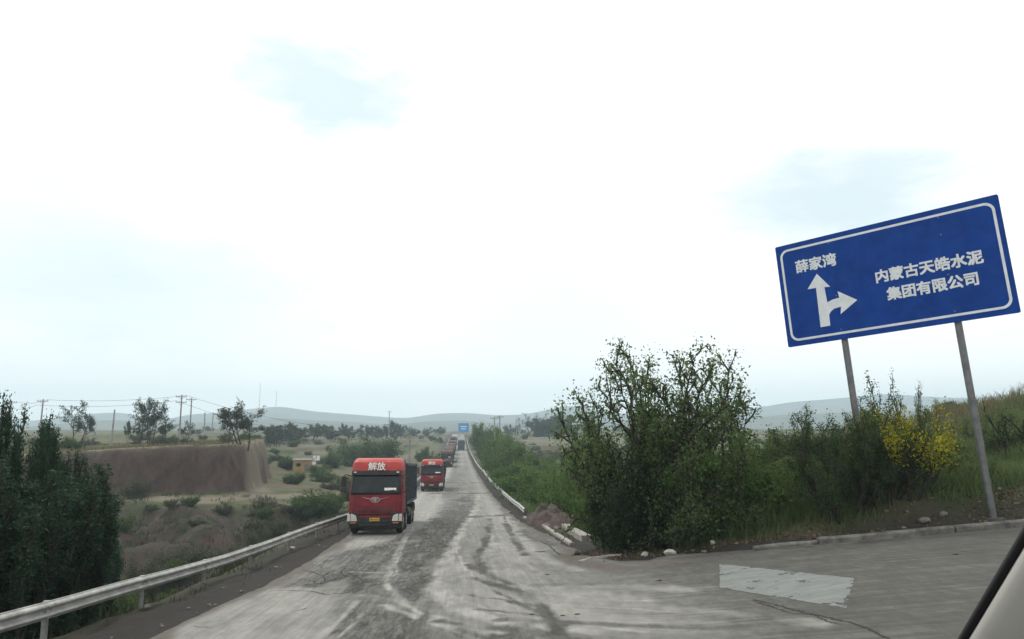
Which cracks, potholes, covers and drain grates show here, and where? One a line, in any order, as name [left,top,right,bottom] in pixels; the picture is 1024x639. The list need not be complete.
crack [272,566,372,610]
crack [753,599,890,639]
